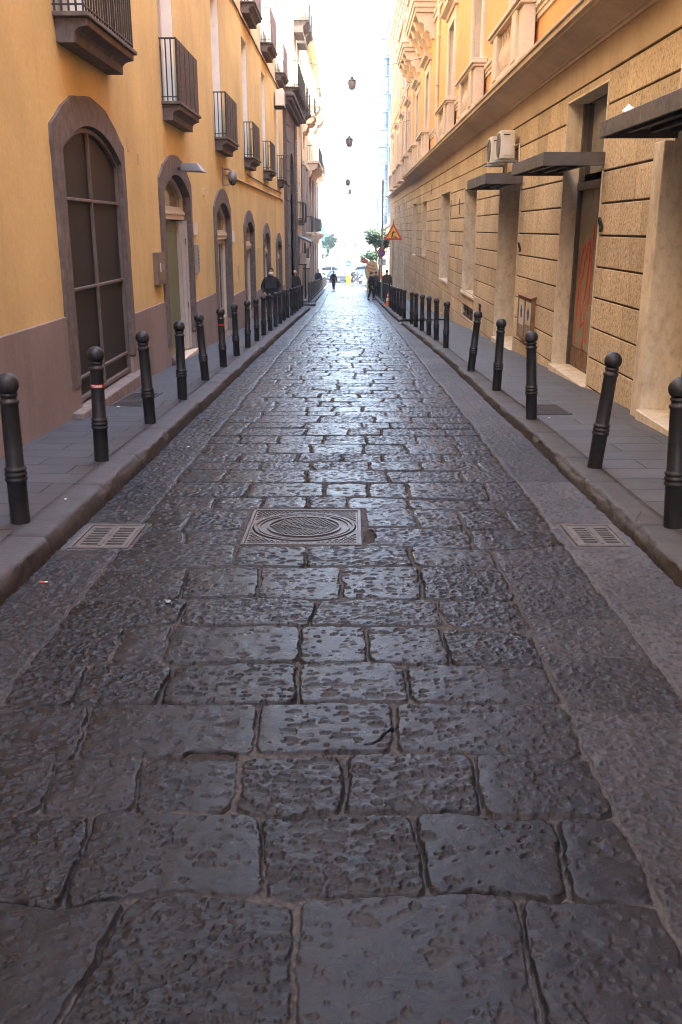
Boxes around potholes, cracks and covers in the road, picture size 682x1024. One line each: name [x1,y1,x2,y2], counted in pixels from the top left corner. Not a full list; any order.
drain grate [67,524,146,550]
drain grate [561,524,632,547]
manhole cover [240,509,362,546]
